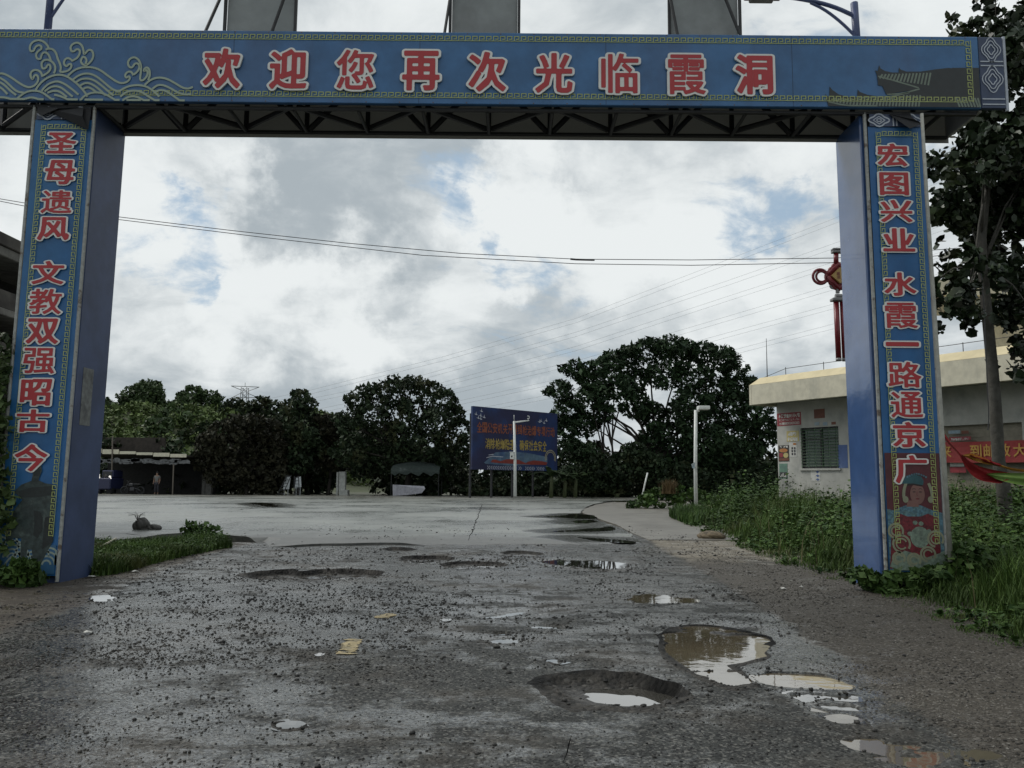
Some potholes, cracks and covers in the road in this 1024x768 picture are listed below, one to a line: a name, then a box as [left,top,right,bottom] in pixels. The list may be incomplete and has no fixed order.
pothole [439,561,508,569]
pothole [964,749,1006,766]
pothole [629,596,702,606]
pothole [786,692,867,713]
pothole [750,671,858,692]
pothole [398,555,454,564]
pothole [657,624,776,691]
pothole [803,707,965,768]
pothole [536,559,632,571]
pothole [526,669,694,713]
pothole [236,568,385,581]
